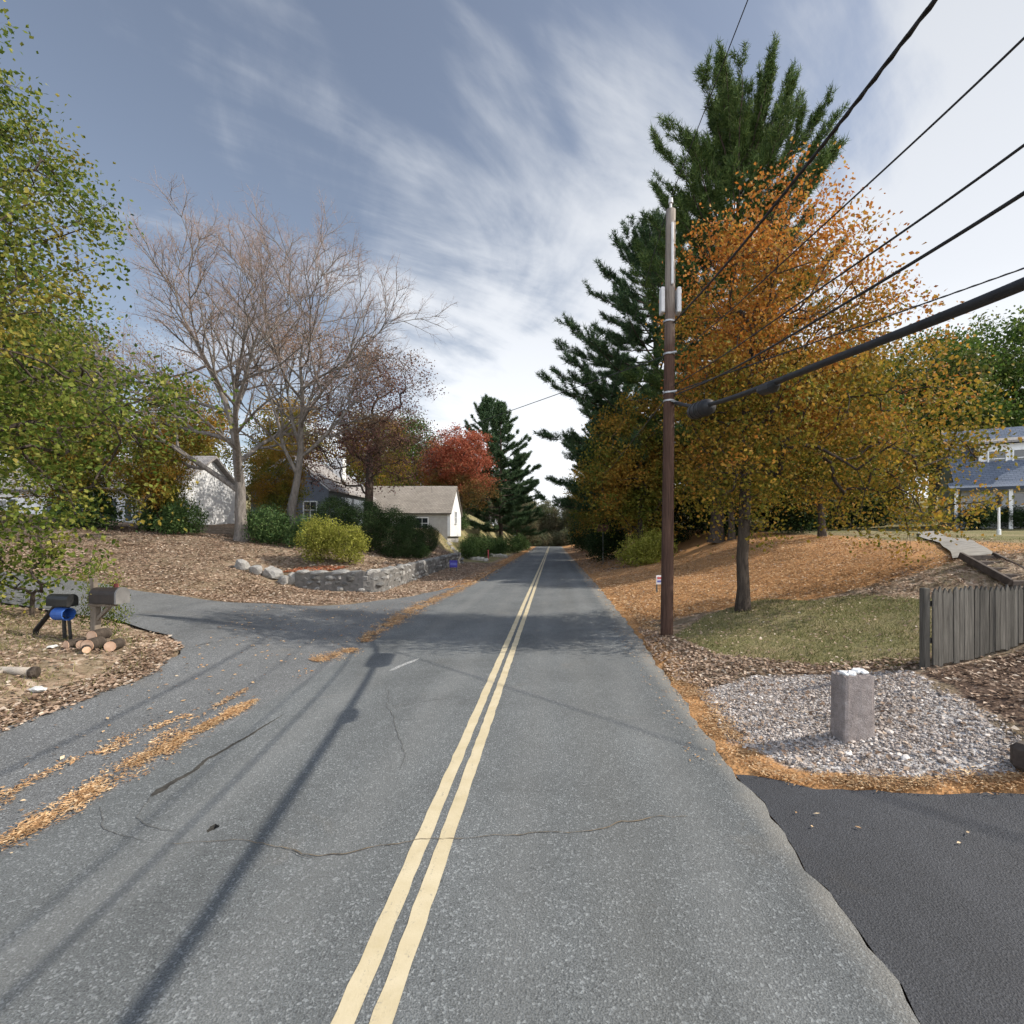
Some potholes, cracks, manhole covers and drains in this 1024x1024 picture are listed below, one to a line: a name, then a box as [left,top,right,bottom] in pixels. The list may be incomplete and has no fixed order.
crack [99,715,677,858]
crack [385,681,457,767]
